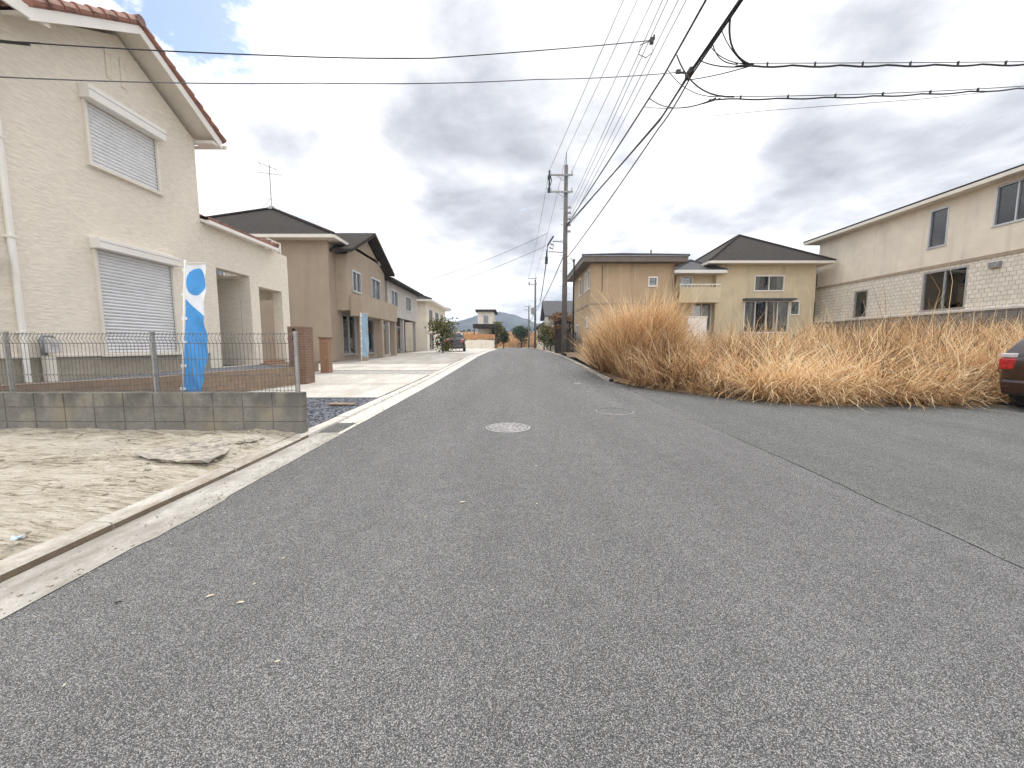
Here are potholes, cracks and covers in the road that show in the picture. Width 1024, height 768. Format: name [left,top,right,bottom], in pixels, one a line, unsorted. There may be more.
manhole cover [486,422,530,432]
